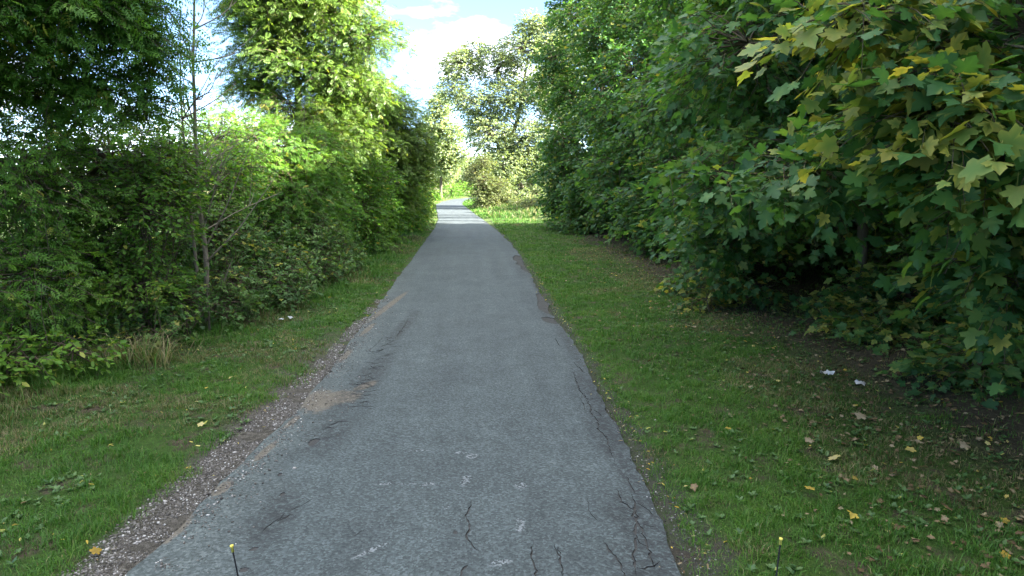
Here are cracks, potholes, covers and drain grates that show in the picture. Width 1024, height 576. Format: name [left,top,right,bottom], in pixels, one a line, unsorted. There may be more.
crack [530,542,564,576]
crack [555,338,660,576]
crack [460,500,479,576]
